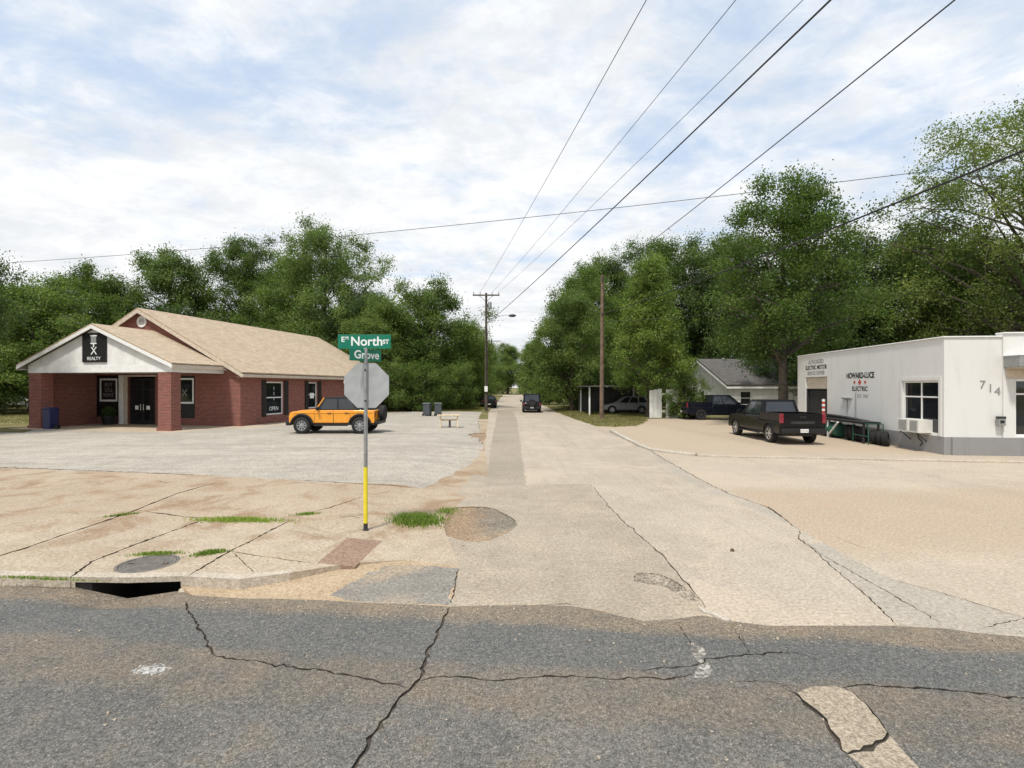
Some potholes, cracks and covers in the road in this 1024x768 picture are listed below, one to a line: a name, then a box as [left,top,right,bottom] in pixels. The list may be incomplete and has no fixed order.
crack [185,571,1024,768]
drain grate [75,581,184,598]
manhole cover [114,554,180,573]
crack [590,484,706,608]
crack [798,531,1024,628]
